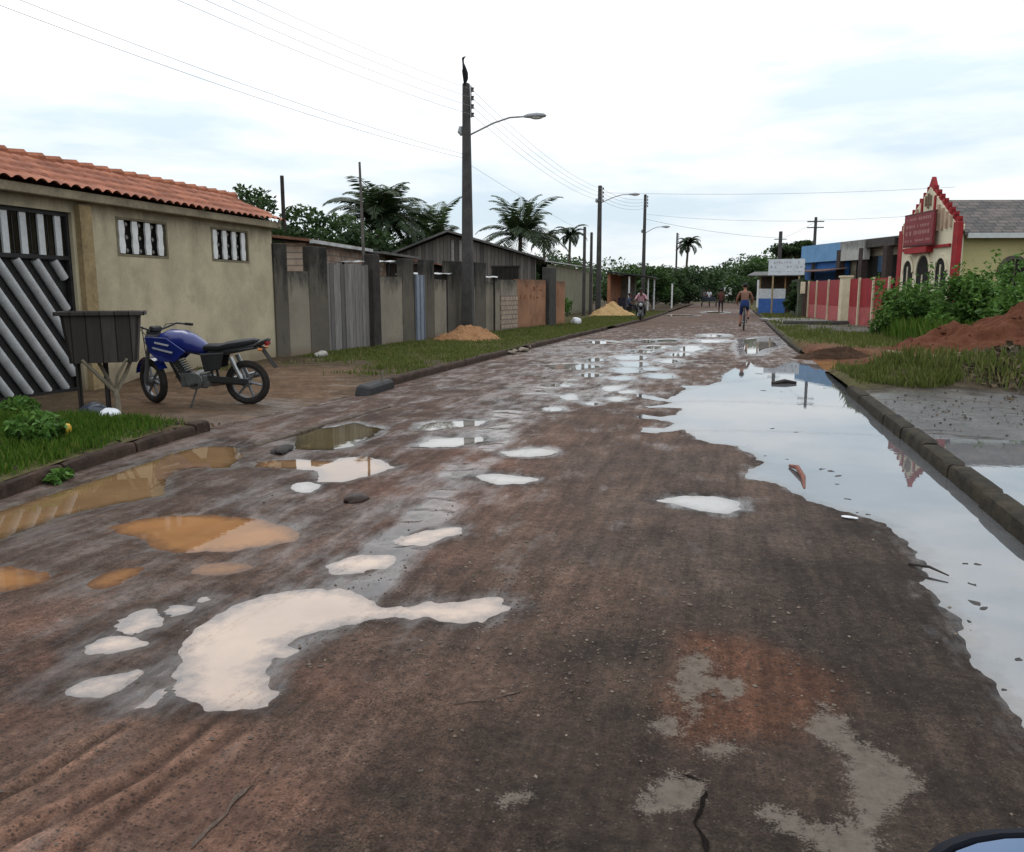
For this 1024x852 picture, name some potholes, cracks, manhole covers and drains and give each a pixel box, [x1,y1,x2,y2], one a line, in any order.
pothole [248,455,398,483]
crack [670,770,709,852]
pothole [314,551,412,578]
pothole [100,512,309,556]
pothole [0,563,61,594]
pothole [386,524,469,547]
pothole [290,422,386,451]
crack [190,754,278,852]
pothole [0,445,248,541]
pothole [162,585,519,718]
pothole [48,666,154,702]
pothole [632,361,1024,738]
